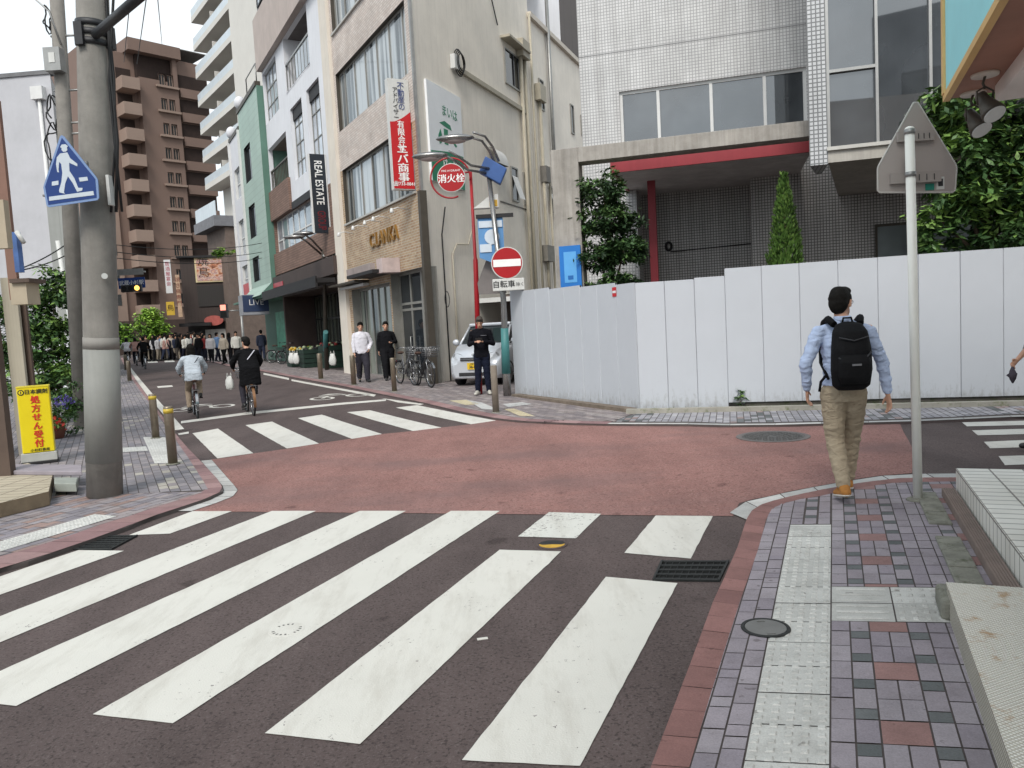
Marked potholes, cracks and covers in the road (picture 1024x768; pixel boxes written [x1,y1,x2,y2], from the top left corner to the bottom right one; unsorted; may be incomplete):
drain grate [652,560,729,582]
manhole cover [536,539,568,549]
manhole cover [741,618,791,638]
manhole cover [736,431,811,442]
drain grate [73,534,138,550]
